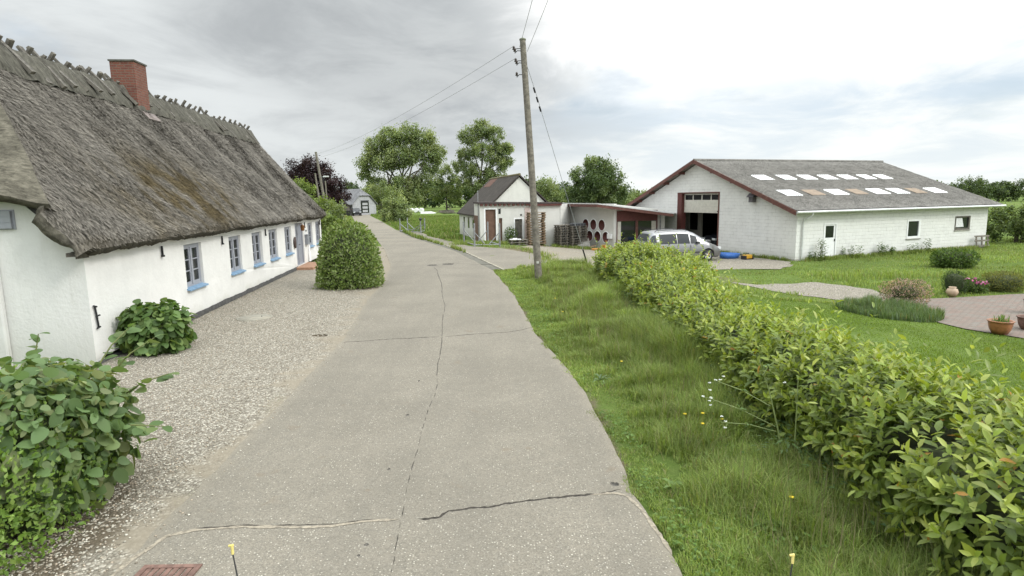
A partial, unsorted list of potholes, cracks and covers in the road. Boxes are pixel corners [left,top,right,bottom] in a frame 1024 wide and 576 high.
crack [111,269,672,576]
drain grate [134,564,203,576]
